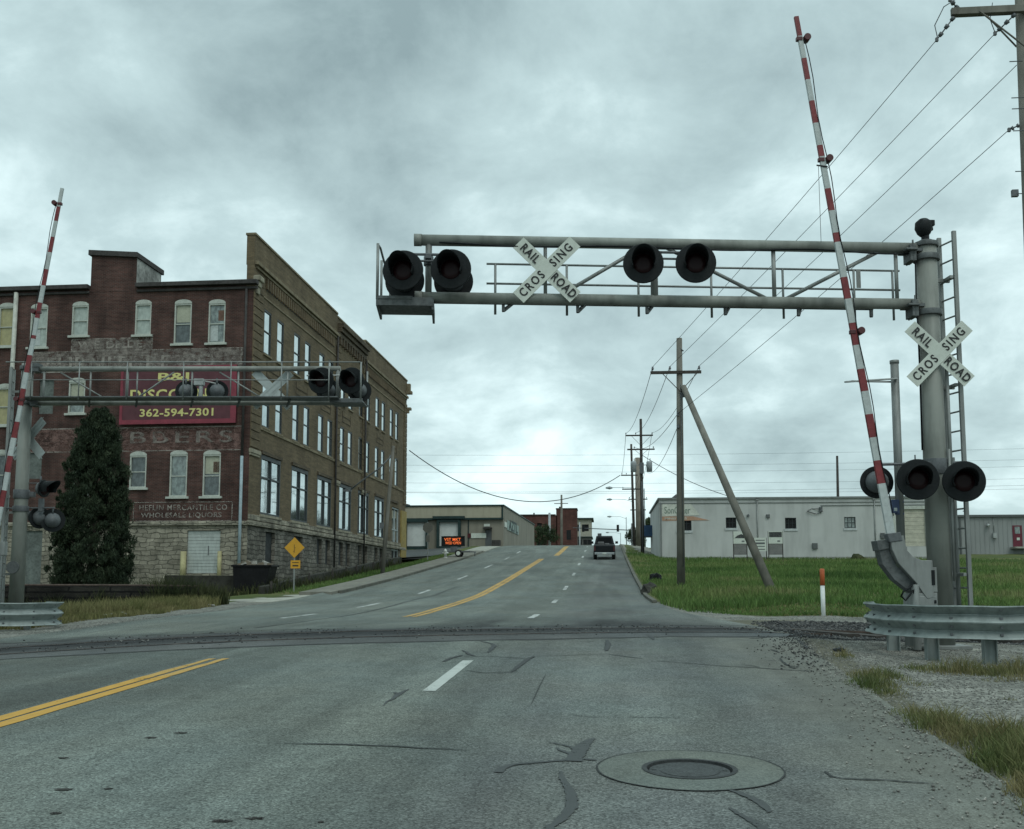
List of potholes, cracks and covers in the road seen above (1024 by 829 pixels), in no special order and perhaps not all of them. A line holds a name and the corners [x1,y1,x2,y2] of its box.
crack [444,641,636,704]
crack [824,771,935,784]
crack [728,790,772,829]
manhole cover [596,750,786,791]
crack [494,738,597,829]
